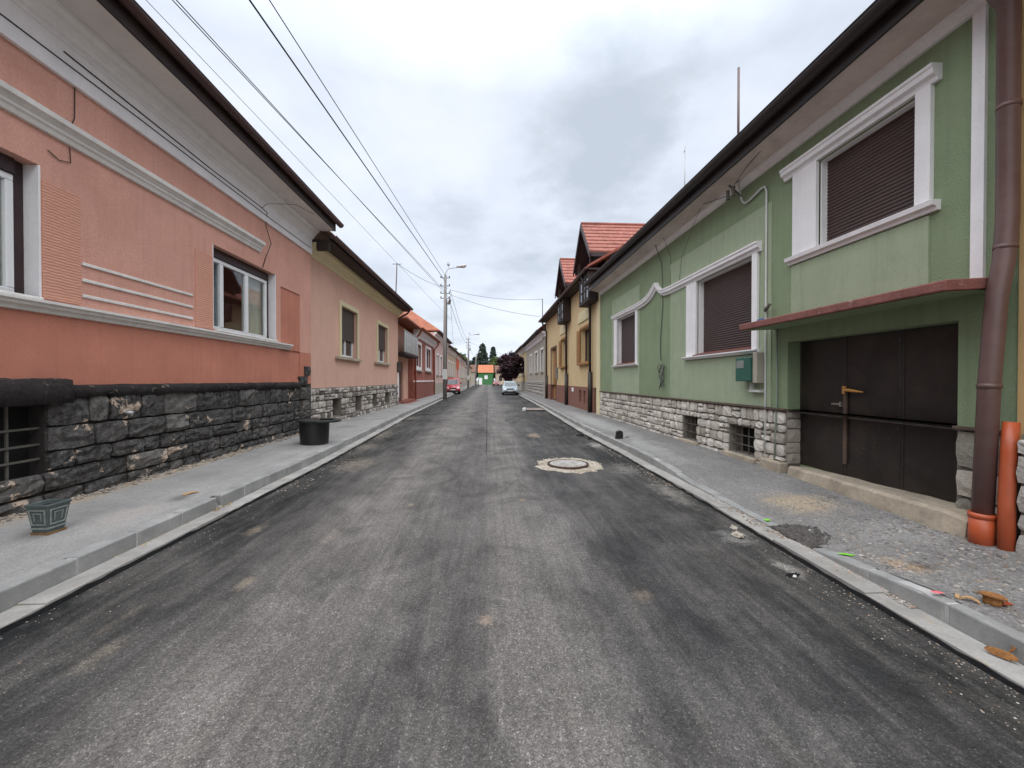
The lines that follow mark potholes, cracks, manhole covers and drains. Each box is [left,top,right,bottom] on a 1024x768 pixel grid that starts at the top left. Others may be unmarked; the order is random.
manhole cover [535,457,603,474]
